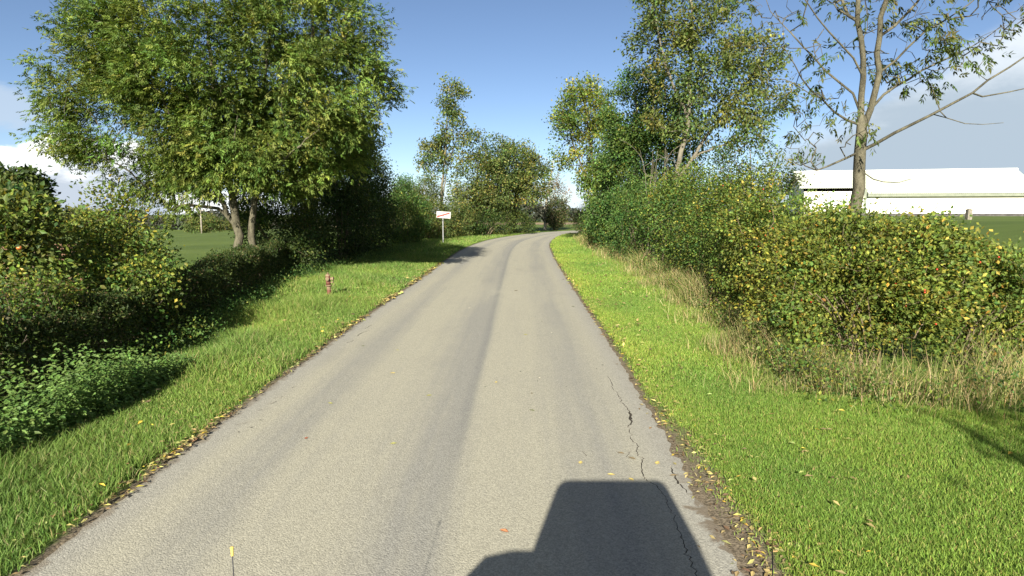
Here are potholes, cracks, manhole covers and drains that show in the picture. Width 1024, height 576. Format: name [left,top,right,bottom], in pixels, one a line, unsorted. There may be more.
crack [608,377,697,576]
